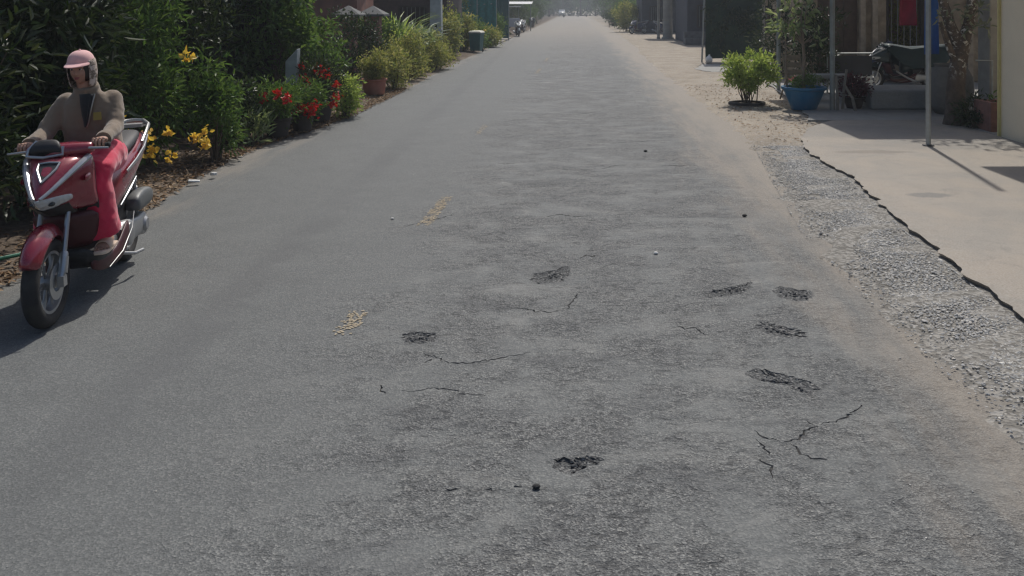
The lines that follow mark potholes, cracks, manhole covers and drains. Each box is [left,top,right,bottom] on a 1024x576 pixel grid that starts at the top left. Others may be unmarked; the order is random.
crack [379,385,485,396]
pothole [702,282,754,299]
pothole [529,266,572,284]
pothole [552,455,604,475]
pothole [745,368,823,394]
pothole [401,331,437,344]
crack [756,405,862,478]
pothole [771,286,813,301]
crack [521,294,578,313]
pothole [755,321,808,339]
crack [423,352,530,364]
